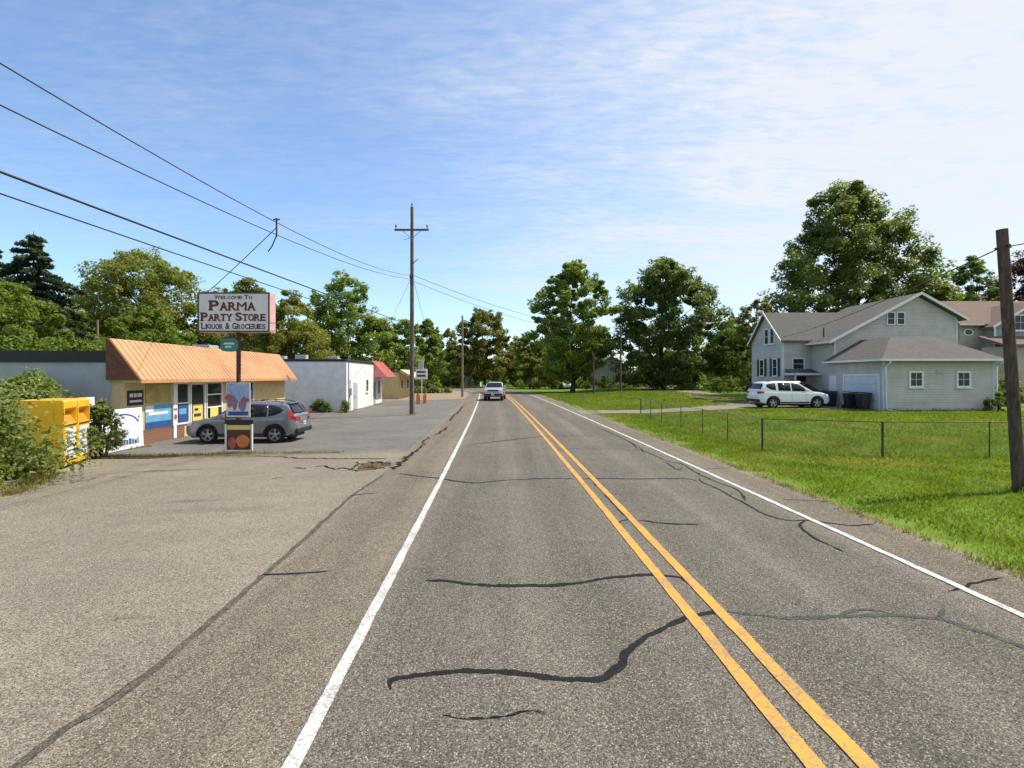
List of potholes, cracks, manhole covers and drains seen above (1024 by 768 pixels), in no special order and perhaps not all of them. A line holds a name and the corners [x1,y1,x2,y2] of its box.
pothole [352,461,391,472]
crack [445,709,543,719]
crack [950,577,1004,591]
crack [224,406,466,479]
